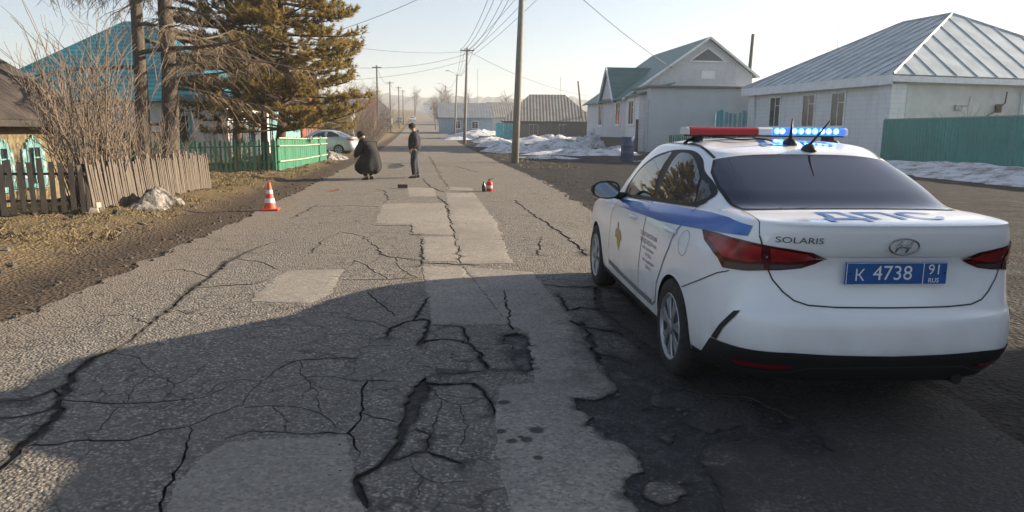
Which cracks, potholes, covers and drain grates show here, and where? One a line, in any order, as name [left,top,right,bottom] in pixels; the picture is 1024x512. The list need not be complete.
pothole [502,333,533,374]
crack [0,225,515,512]
crack [514,200,587,256]
